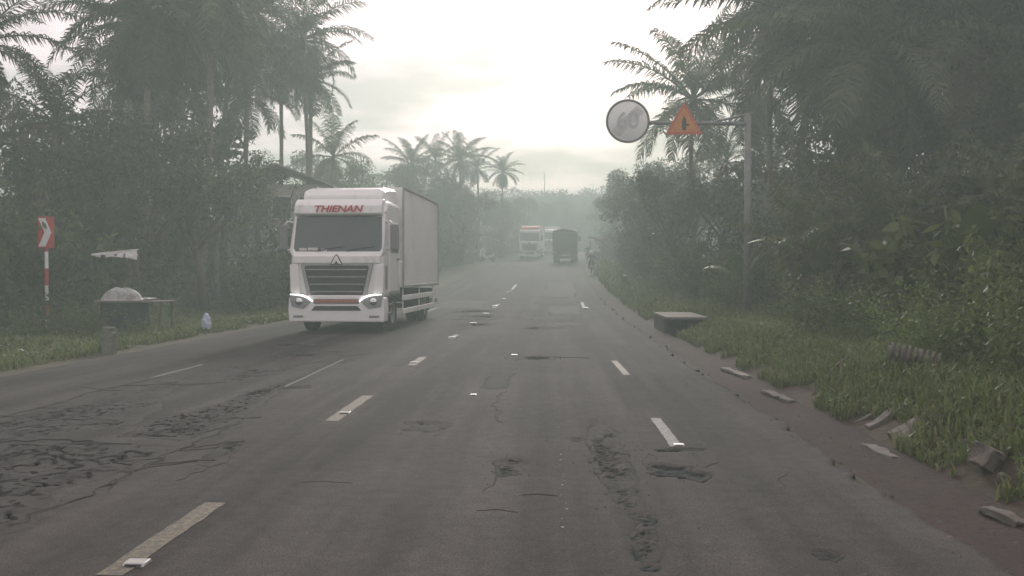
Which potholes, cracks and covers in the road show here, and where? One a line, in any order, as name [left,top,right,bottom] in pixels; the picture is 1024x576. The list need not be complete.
crack [477,494,557,513]
crack [492,381,509,425]
crack [0,351,367,537]
pothole [646,463,713,483]
